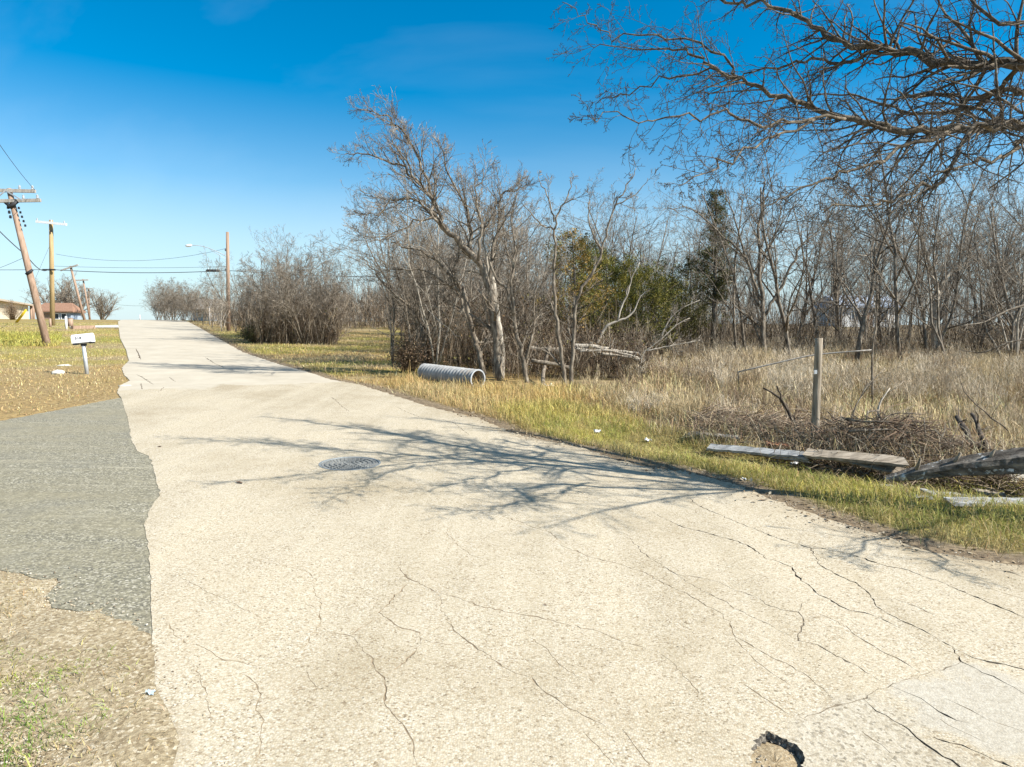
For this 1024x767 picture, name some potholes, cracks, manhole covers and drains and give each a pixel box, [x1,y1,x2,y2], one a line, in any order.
pothole [750,731,805,767]
crack [169,624,271,763]
manhole cover [318,457,381,471]
crack [164,560,322,652]
crack [497,499,1024,767]
crack [332,561,647,764]
